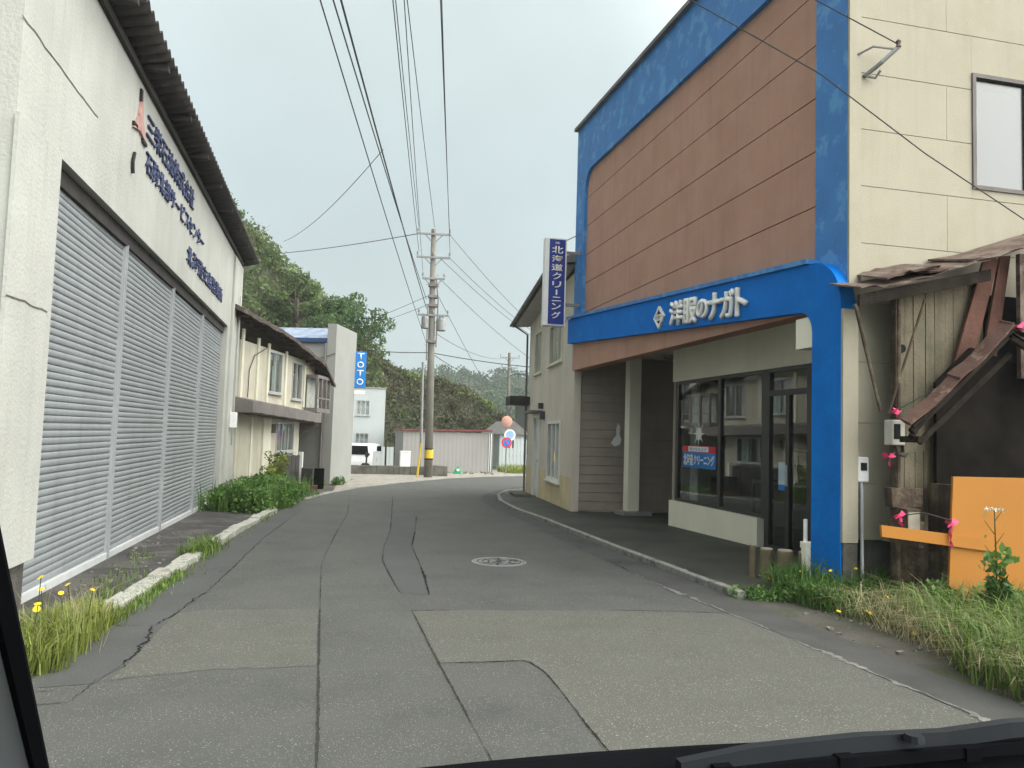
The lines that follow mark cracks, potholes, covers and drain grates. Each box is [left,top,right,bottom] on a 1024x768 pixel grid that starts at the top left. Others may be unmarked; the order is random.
manhole cover [471,557,527,566]
crack [75,592,207,697]
crack [313,500,350,768]
